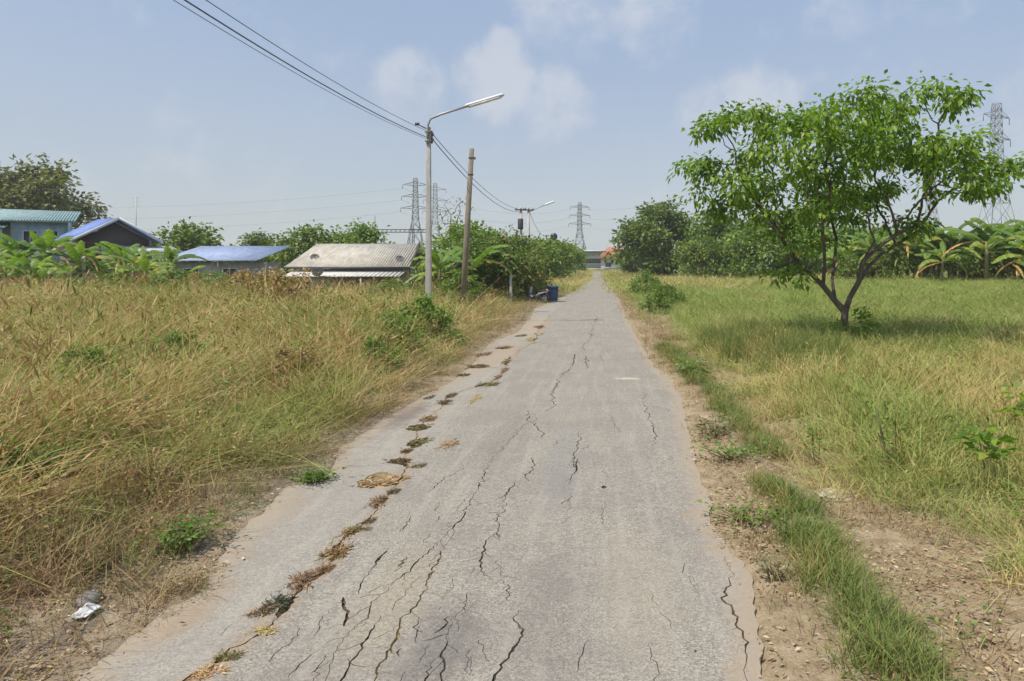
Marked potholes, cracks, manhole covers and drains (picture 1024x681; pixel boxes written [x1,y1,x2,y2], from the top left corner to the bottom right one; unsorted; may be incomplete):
crack [270,318,604,681]
crack [720,561,749,680]
